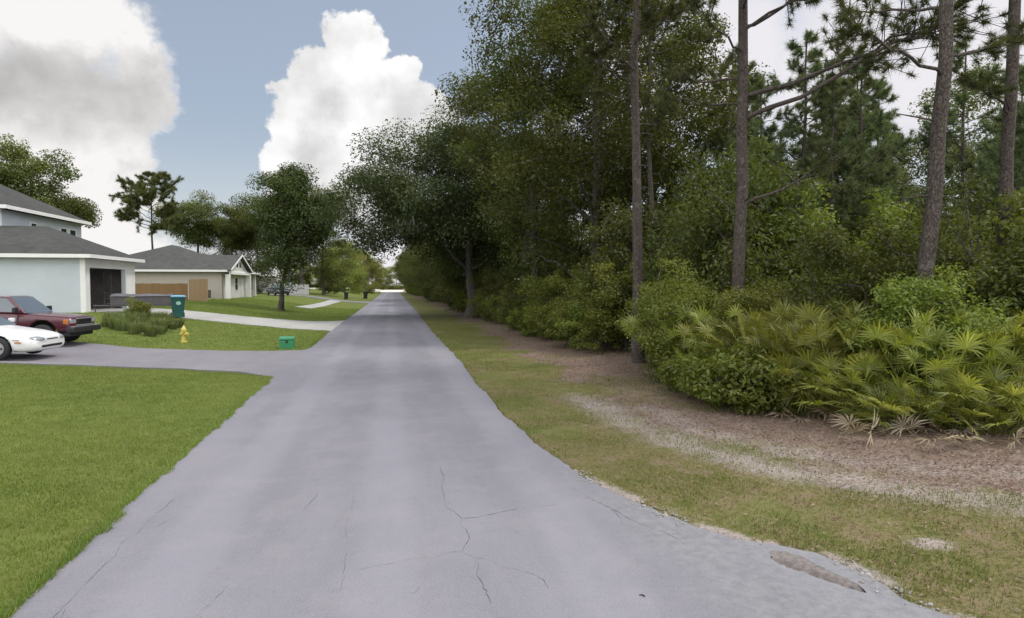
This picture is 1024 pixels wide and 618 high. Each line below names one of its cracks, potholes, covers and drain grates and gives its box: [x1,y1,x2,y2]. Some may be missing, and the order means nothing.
pothole [769,551,866,593]
crack [354,470,556,604]
